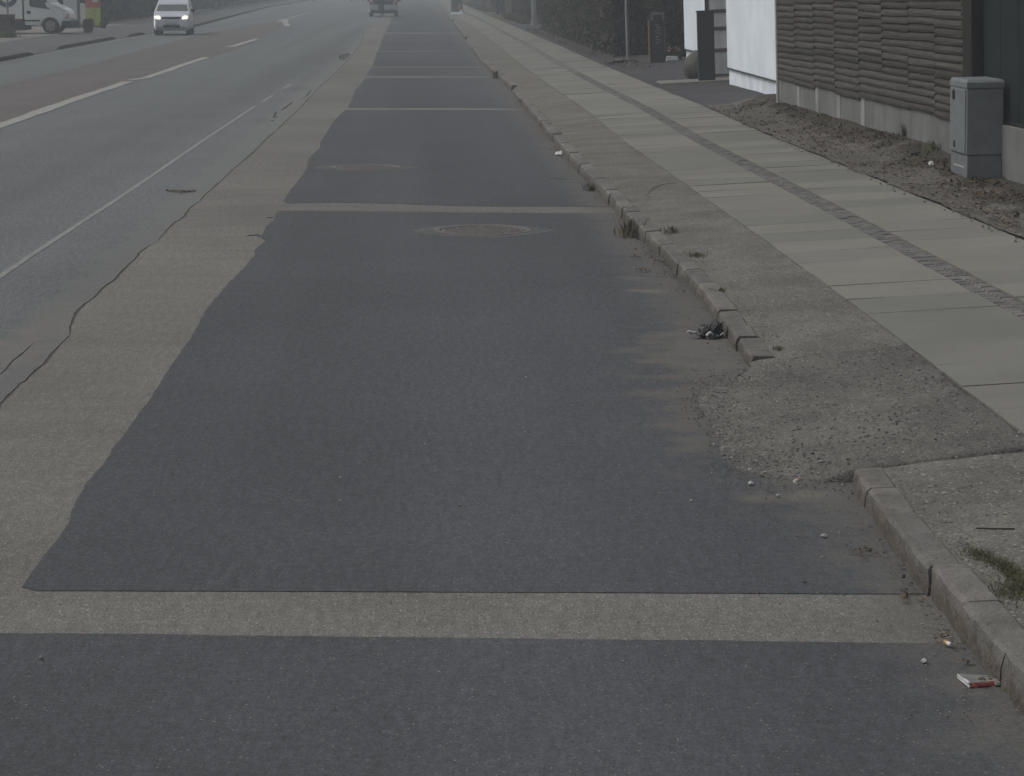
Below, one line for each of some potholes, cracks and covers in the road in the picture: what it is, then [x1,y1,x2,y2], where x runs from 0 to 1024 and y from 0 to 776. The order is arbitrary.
crack [1,345,31,374]
manhole cover [411,224,553,237]
